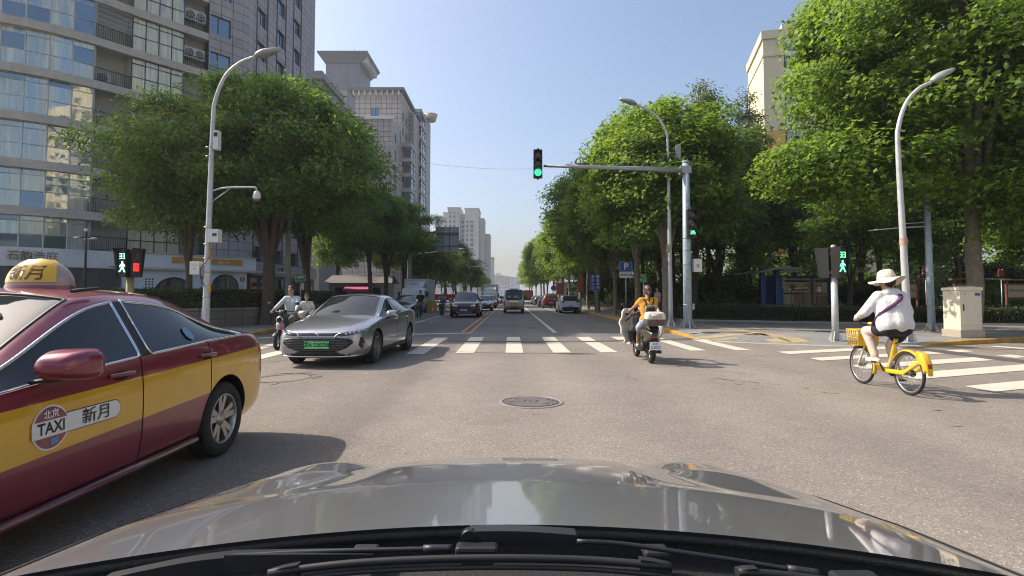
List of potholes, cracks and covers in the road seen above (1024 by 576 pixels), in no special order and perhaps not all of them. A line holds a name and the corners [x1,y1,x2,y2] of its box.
manhole cover [499,395,564,409]
